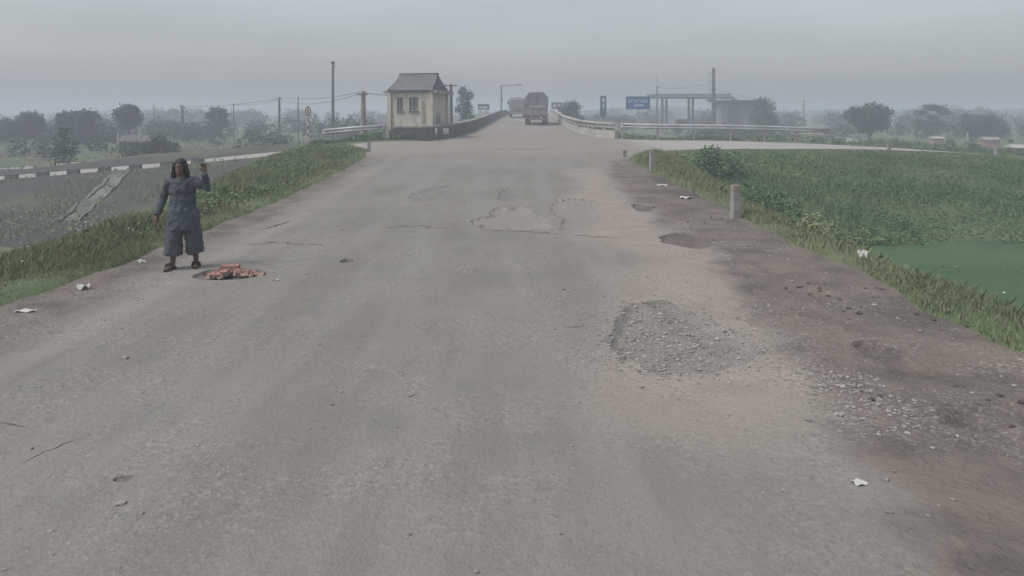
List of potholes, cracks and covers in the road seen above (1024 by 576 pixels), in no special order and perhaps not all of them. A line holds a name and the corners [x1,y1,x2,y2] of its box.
pothole [658,233,713,249]
pothole [631,204,653,212]
pothole [408,185,464,202]
crack [245,220,323,246]
pothole [851,339,944,380]
pothole [561,294,810,391]
pothole [496,188,522,201]
